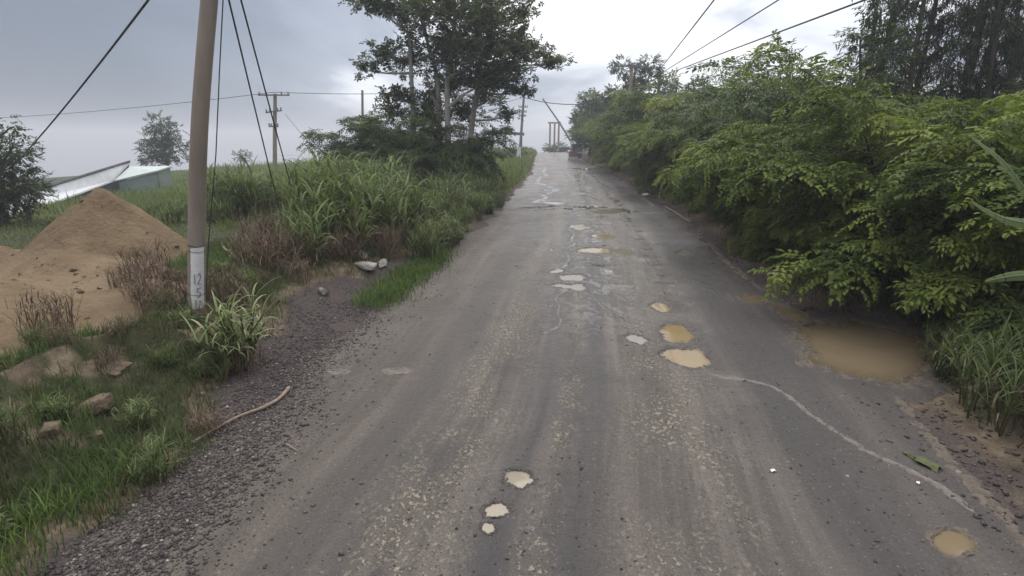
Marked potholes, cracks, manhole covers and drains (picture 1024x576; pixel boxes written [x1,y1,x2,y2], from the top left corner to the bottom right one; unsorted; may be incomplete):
pothole [499,466,542,491]
pothole [779,313,960,393]
pothole [479,521,498,536]
pothole [554,273,590,282]
crack [710,373,1024,547]
pothole [623,333,651,346]
pothole [653,320,704,345]
pothole [478,500,517,519]
pothole [566,223,596,231]
crack [541,289,623,335]
pothole [646,300,675,314]
pothole [544,282,592,291]
